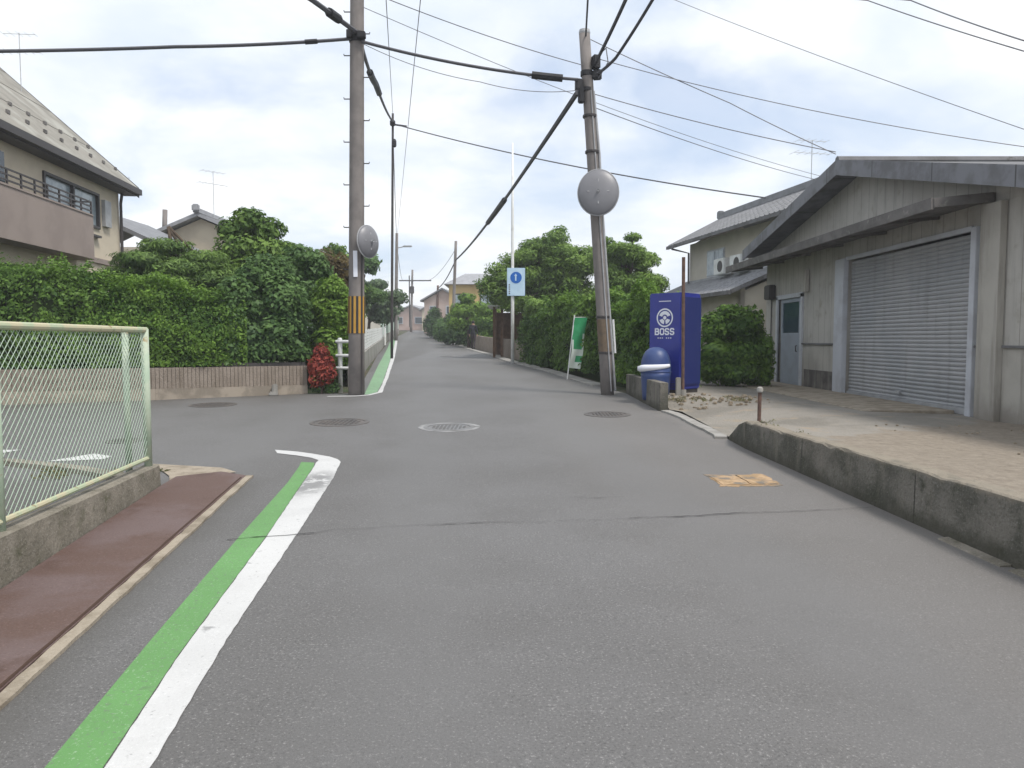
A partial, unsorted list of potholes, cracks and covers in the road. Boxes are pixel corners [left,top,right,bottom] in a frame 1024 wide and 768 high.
manhole cover [309,418,370,427]
manhole cover [418,423,481,432]
